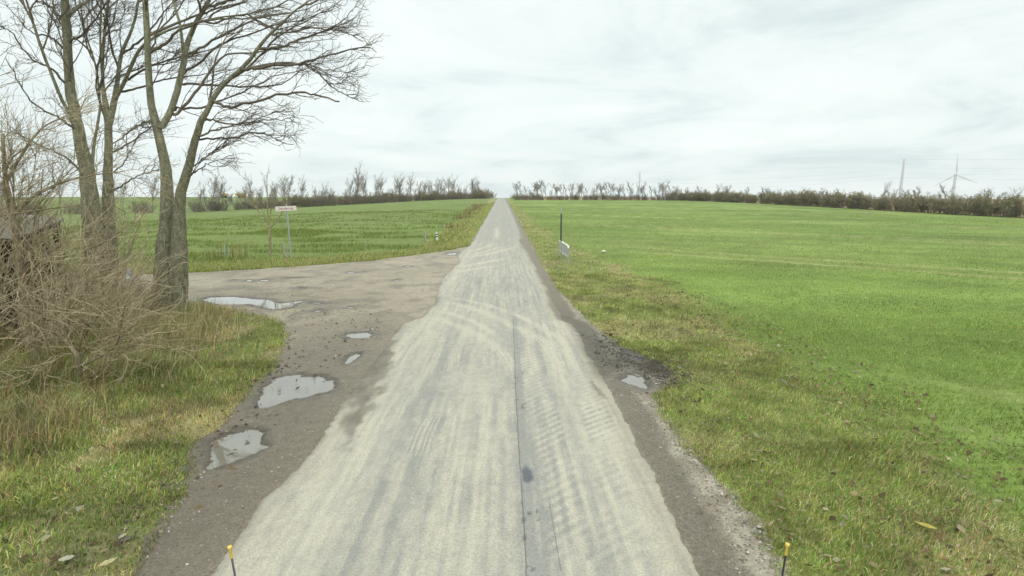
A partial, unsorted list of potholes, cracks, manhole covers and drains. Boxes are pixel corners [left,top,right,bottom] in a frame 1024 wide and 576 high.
pothole [241,370,348,412]
pothole [610,367,659,392]
pothole [337,330,381,340]
